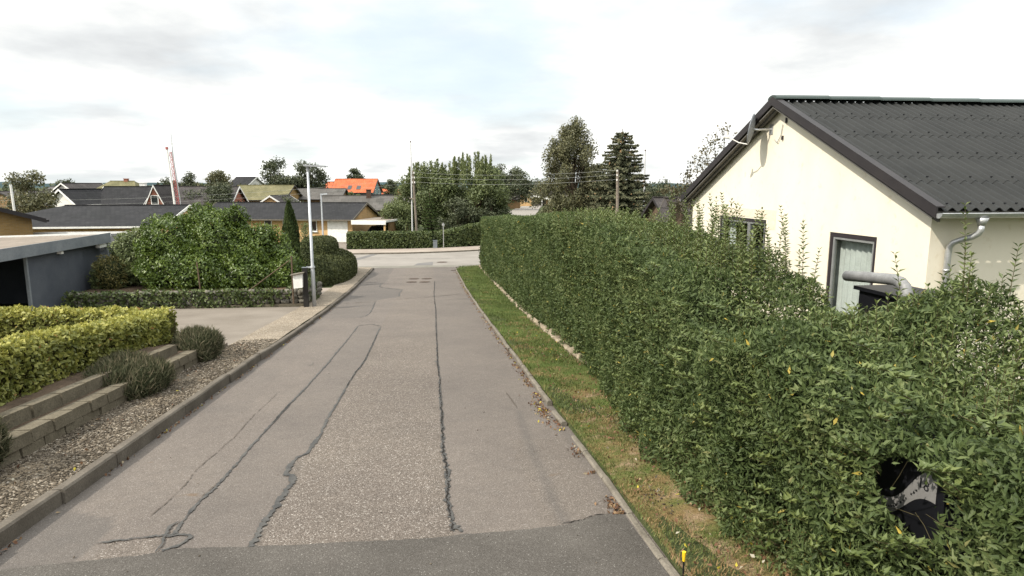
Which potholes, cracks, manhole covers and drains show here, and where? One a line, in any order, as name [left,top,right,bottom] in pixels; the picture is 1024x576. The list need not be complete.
crack [360,281,463,532]
